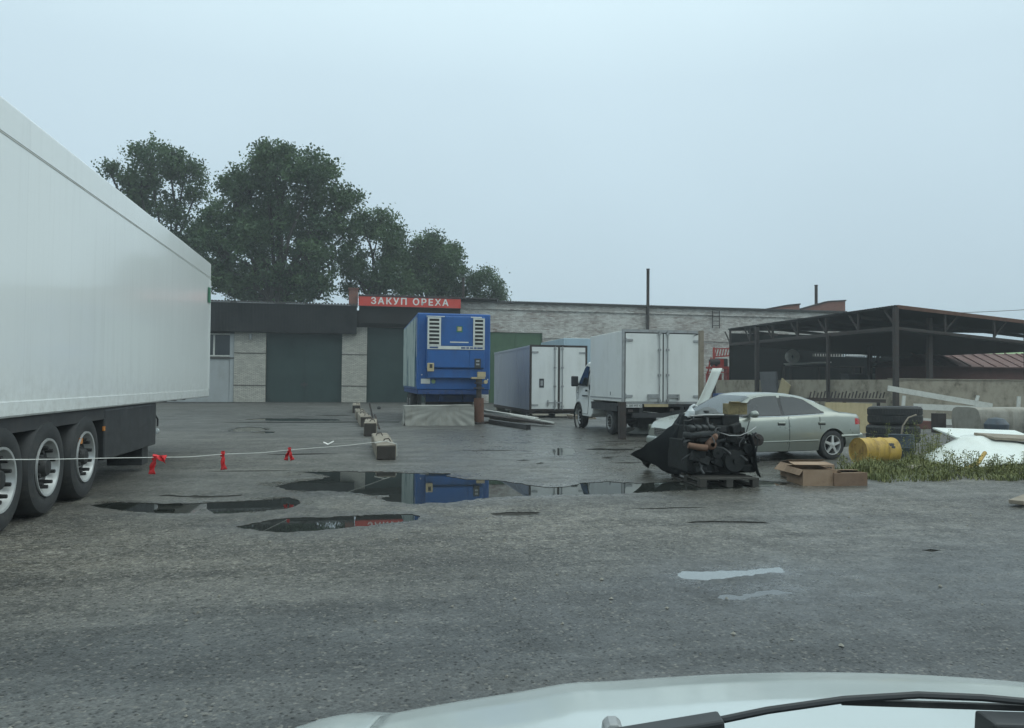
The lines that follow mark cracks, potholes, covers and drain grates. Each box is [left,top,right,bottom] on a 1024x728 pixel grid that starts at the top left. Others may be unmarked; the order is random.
pothole [90,497,301,514]
crack [636,507,766,523]
crack [228,415,358,423]
pothole [236,514,420,533]
pothole [275,471,789,504]
